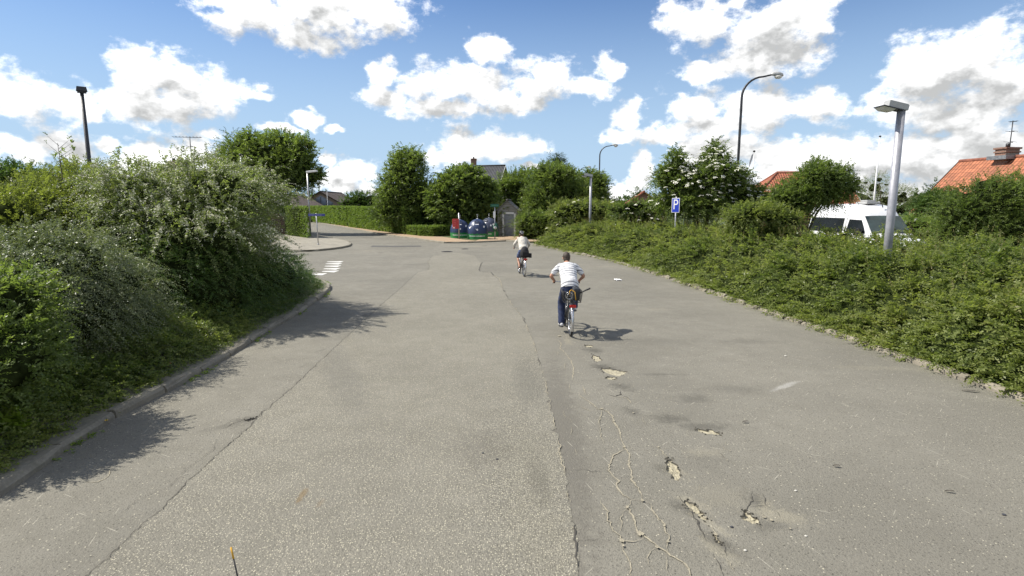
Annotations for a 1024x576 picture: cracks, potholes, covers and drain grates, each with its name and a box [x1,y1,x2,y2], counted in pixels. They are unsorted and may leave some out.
pothole [740,509,761,525]
crack [479,263,735,576]
pothole [601,367,628,376]
pothole [664,456,682,481]
pothole [694,427,723,437]
pothole [681,498,712,526]
